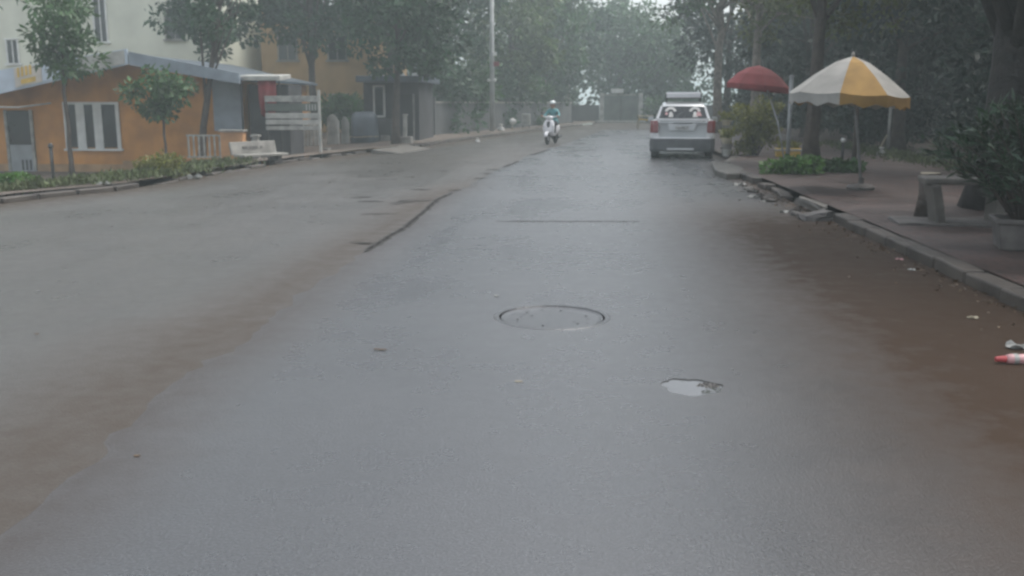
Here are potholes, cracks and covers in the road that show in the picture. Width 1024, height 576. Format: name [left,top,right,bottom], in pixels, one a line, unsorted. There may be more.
pothole [661,378,723,396]
manhole cover [494,304,610,330]
